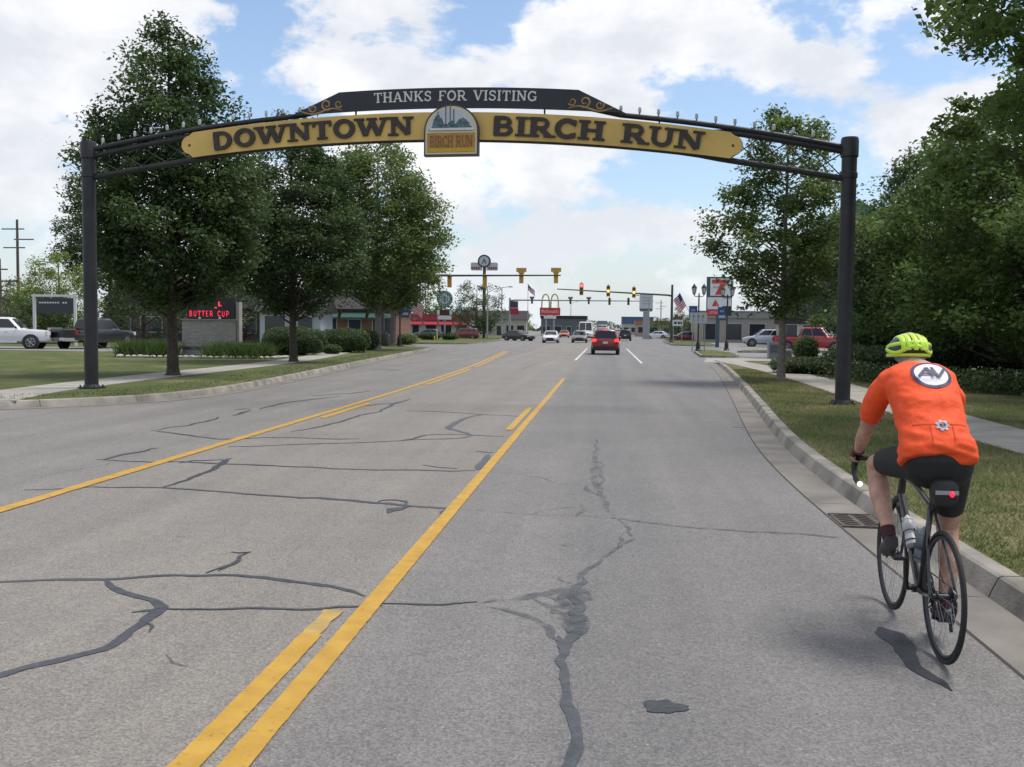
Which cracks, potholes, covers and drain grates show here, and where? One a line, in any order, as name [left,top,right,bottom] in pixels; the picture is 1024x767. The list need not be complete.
drain grate [828,513,879,529]
